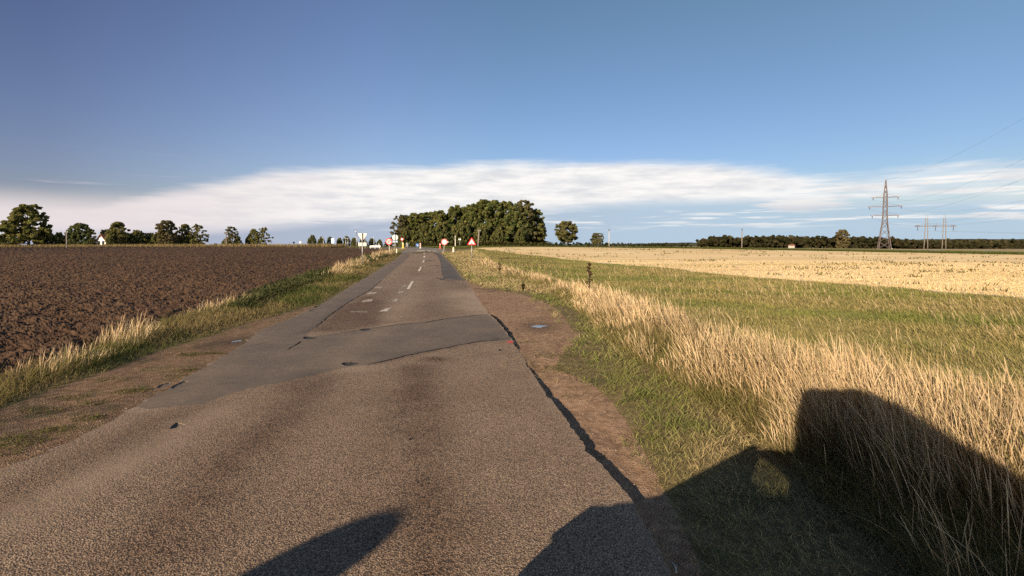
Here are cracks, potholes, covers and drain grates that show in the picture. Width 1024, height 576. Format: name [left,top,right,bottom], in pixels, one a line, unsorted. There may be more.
crack [490,314,519,349]
